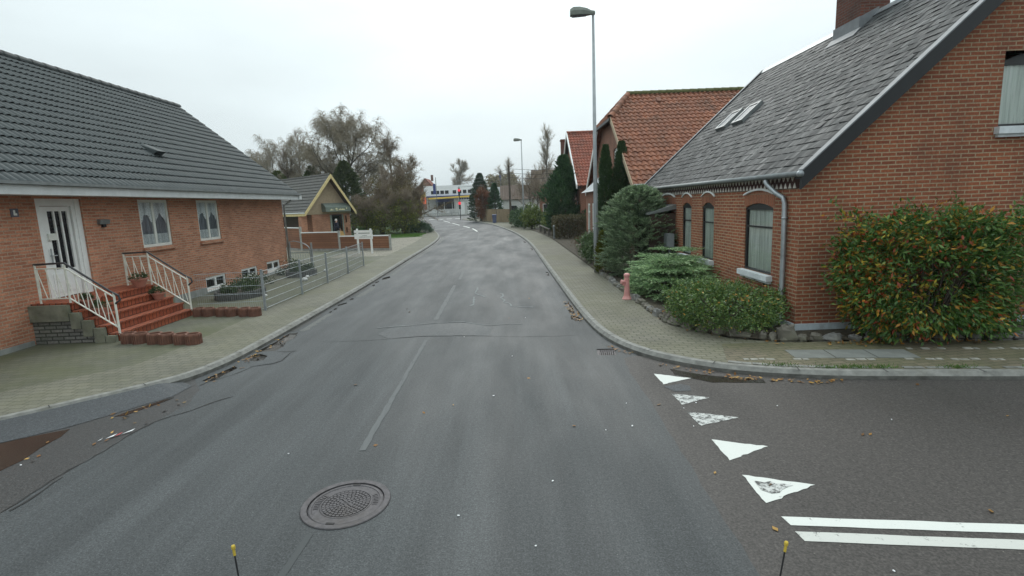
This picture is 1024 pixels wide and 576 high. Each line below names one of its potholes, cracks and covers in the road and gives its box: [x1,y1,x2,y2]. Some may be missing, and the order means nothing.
manhole cover [300,480,391,530]
